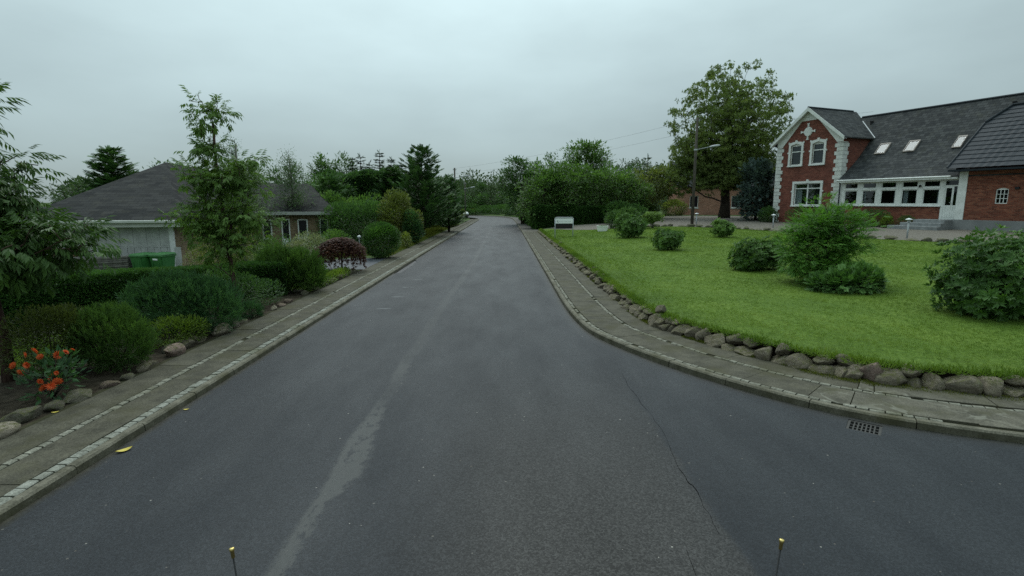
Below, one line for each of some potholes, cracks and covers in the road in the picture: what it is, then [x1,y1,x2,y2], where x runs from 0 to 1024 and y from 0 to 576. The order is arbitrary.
crack [622,374,719,533]
drain grate [846,420,882,436]
